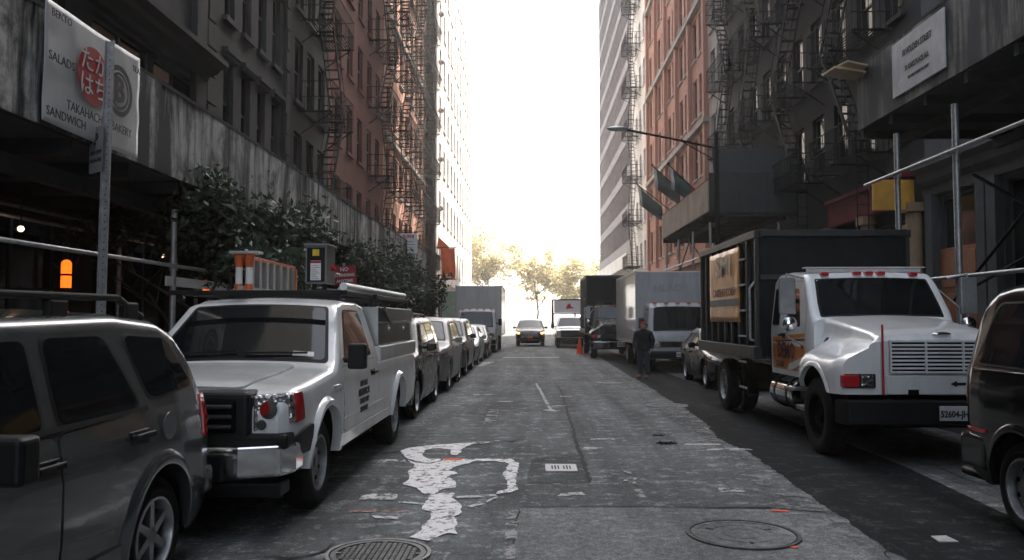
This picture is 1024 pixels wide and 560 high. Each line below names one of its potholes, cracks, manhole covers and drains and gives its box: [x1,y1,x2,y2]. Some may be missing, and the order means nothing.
manhole cover [686,519,802,550]
